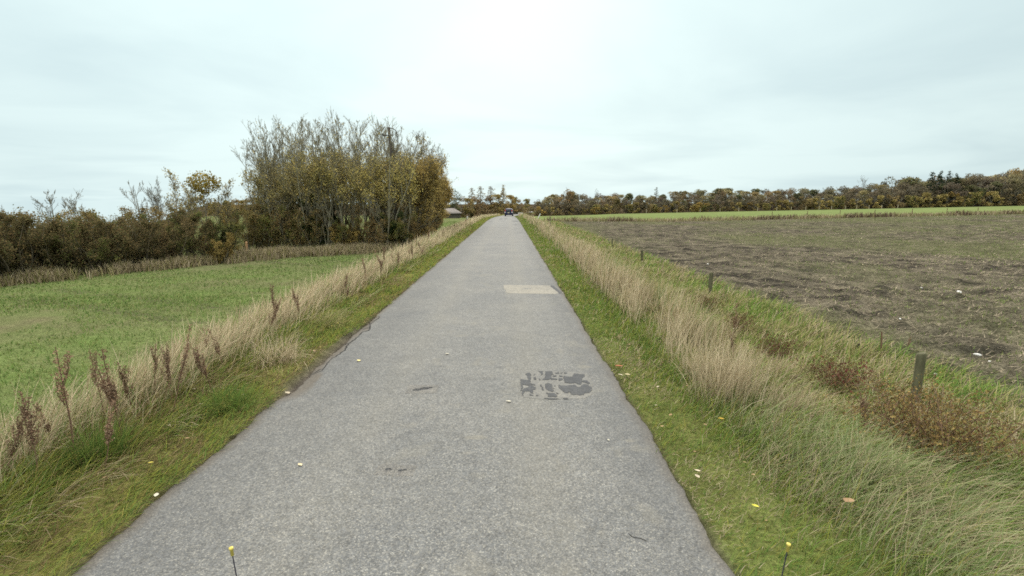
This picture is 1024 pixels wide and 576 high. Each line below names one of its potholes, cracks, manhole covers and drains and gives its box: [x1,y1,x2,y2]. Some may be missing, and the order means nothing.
crack [314,315,381,373]
